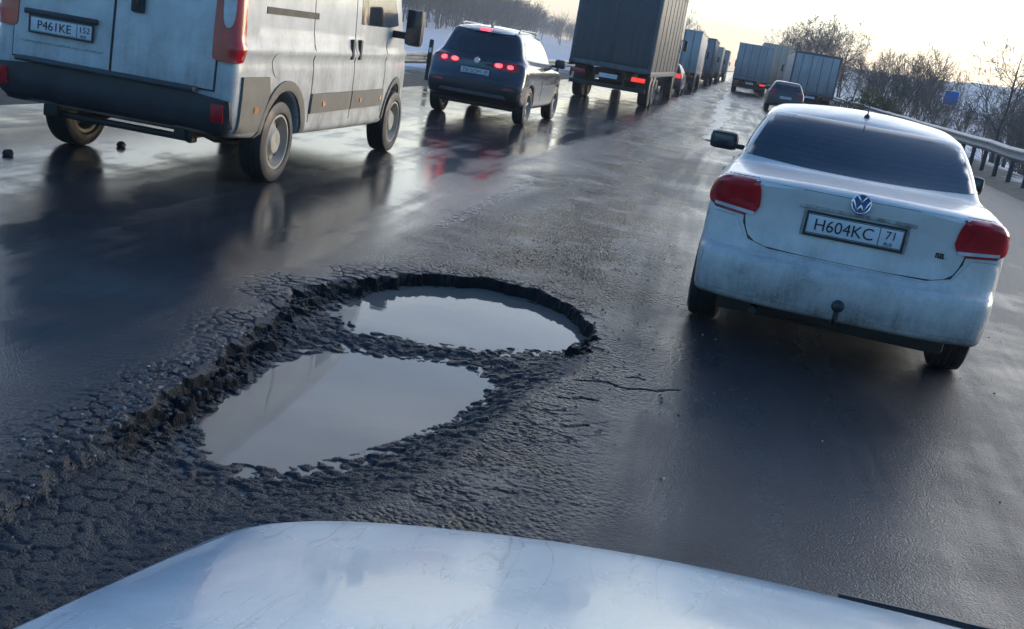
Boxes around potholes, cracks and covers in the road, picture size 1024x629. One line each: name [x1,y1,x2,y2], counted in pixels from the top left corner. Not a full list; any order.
crack [0,267,410,598]
crack [410,376,681,511]
pothole [266,273,601,368]
